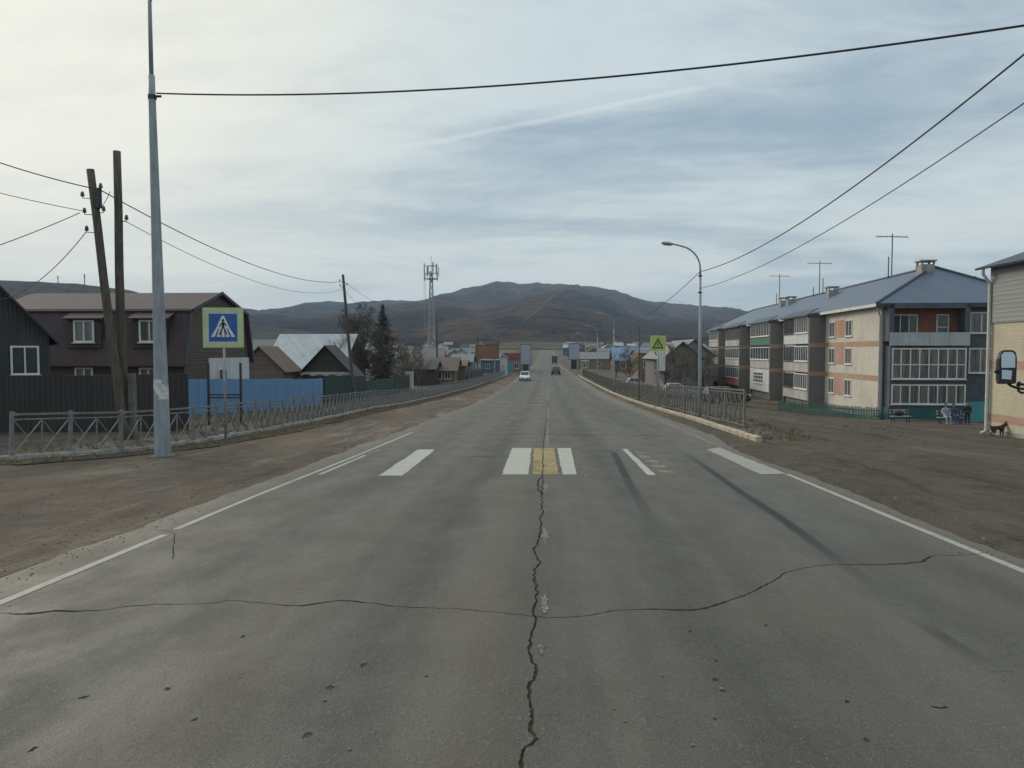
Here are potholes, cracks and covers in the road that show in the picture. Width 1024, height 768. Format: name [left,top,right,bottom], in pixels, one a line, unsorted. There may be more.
crack [8,401,988,768]
